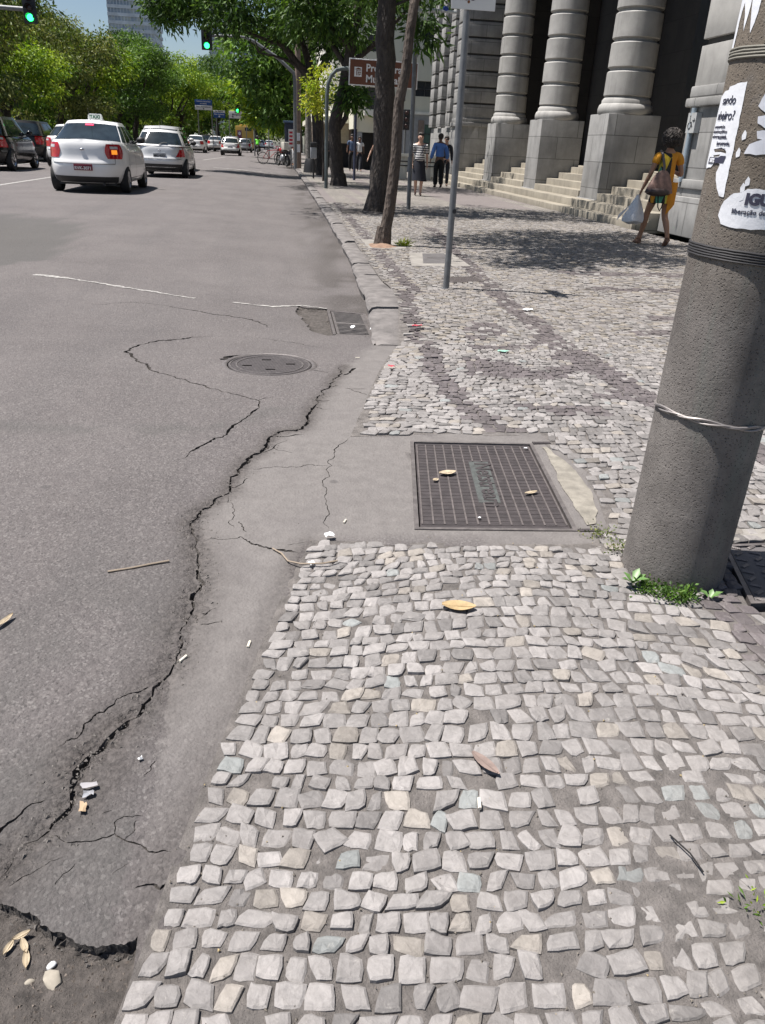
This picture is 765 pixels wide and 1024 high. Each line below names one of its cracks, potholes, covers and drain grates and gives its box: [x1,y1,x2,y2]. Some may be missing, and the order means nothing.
pothole [0,904,138,1024]
drain grate [327,310,372,336]
crack [0,337,361,870]
manhole cover [222,353,317,376]
